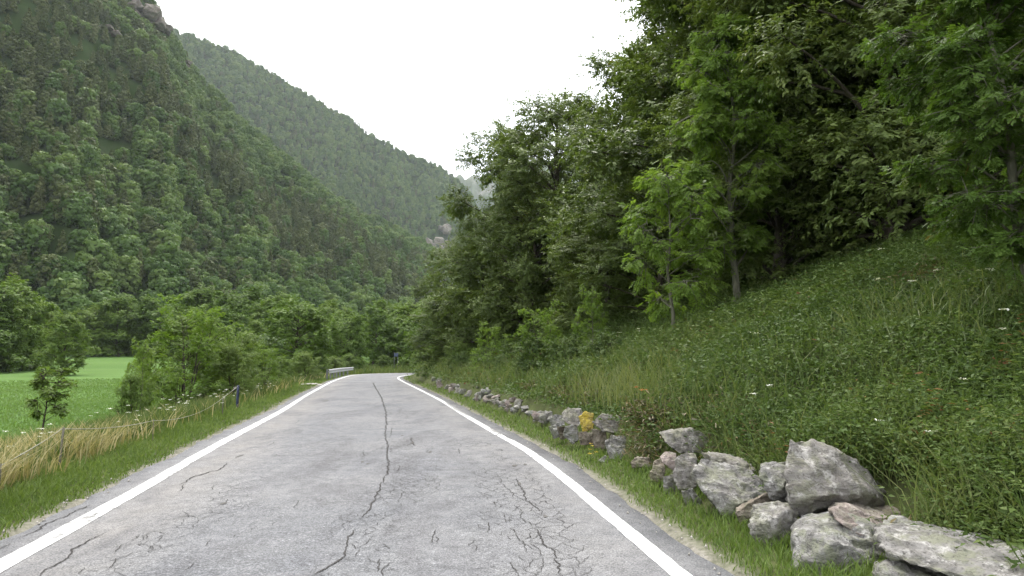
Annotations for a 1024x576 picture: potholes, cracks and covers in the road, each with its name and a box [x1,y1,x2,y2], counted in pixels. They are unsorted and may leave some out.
crack [439,429,592,576]
crack [1,441,316,576]
crack [313,383,442,576]
